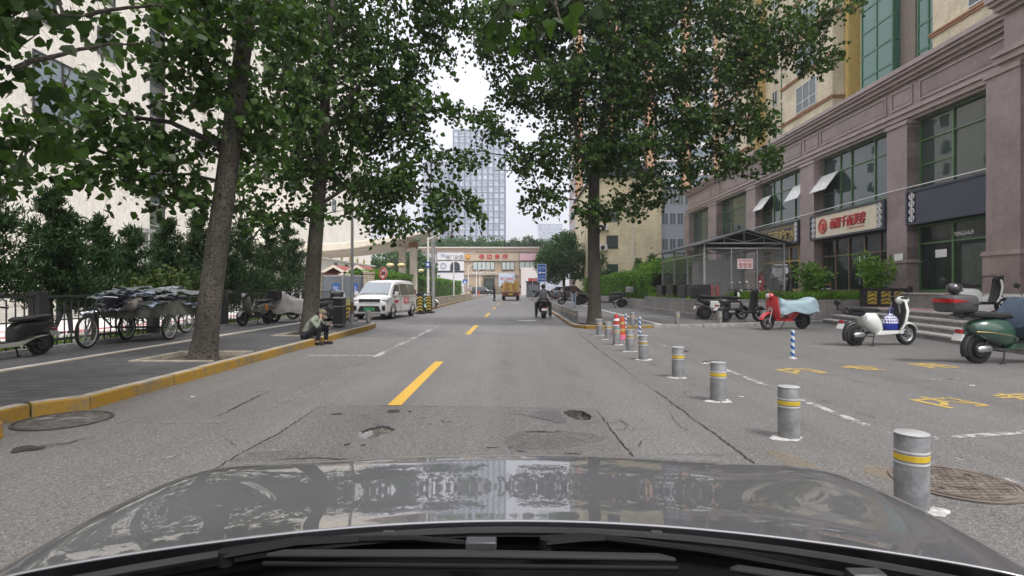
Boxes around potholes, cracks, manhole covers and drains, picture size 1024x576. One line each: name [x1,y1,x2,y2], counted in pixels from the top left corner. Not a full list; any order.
manhole cover [888,464,1024,505]
manhole cover [8,411,115,431]
pothole [563,410,592,421]
pothole [355,425,395,439]
